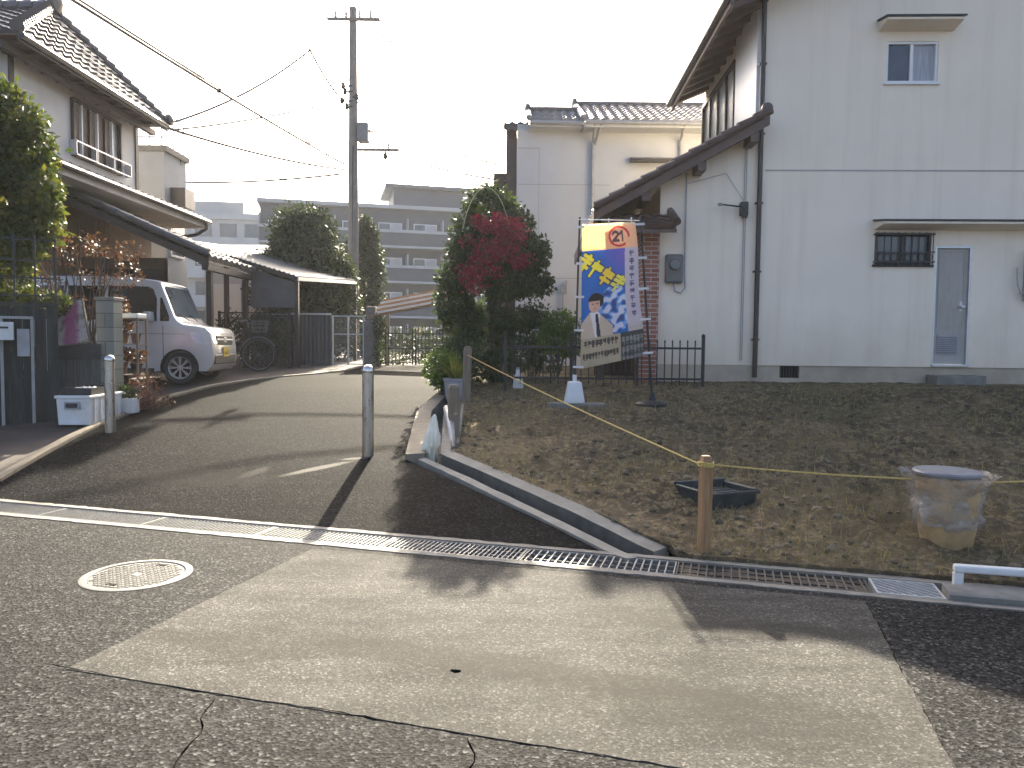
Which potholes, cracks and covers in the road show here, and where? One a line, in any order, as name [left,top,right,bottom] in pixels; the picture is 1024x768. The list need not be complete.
manhole cover [78,560,193,592]
crack [59,666,619,768]
drain grate [868,578,947,600]
